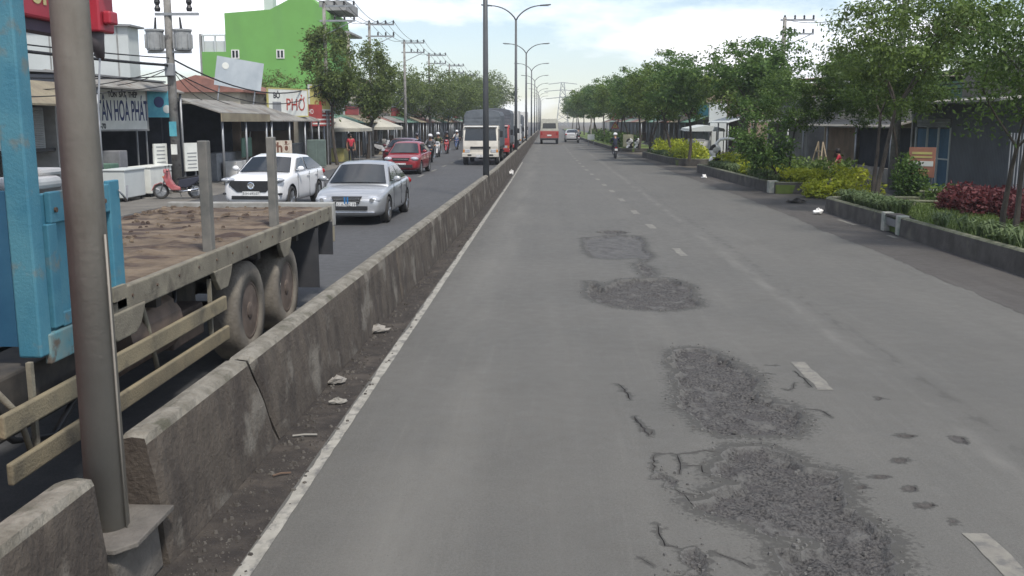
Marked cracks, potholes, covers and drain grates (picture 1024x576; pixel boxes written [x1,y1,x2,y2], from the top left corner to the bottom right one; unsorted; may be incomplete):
crack [618,384,653,436]
pothole [661,342,817,440]
crack [639,450,751,568]
pothole [673,440,914,576]
